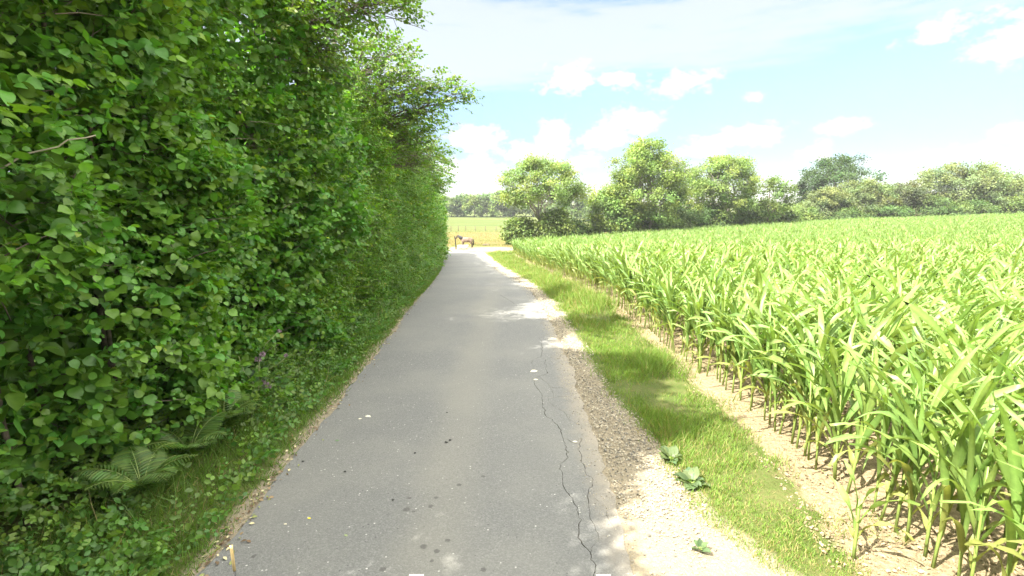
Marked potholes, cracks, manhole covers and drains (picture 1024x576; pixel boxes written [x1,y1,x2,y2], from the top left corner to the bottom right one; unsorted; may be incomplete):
crack [531,337,613,576]
